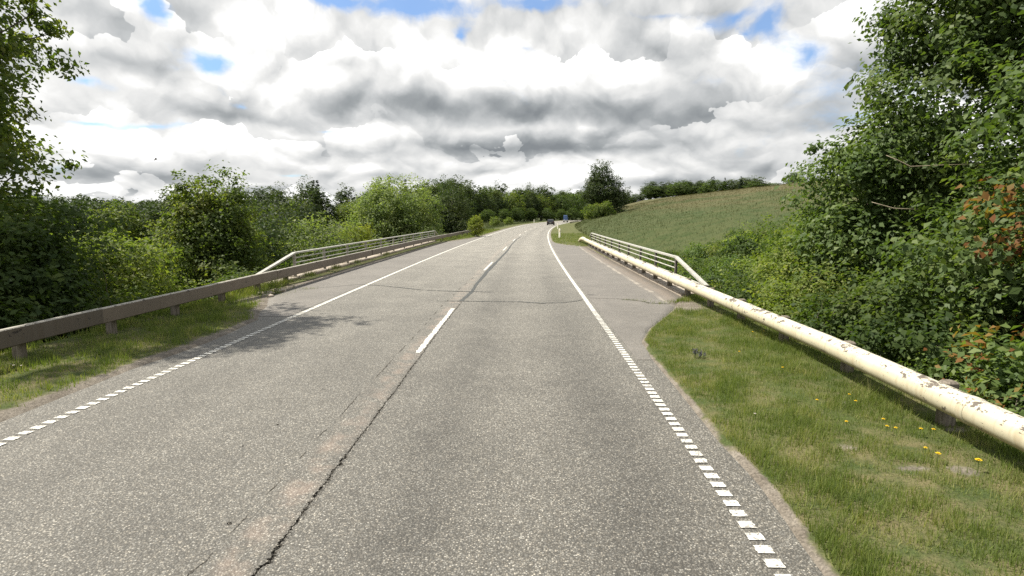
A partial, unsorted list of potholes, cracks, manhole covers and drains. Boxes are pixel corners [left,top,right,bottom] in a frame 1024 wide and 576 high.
crack [187,277,580,576]
